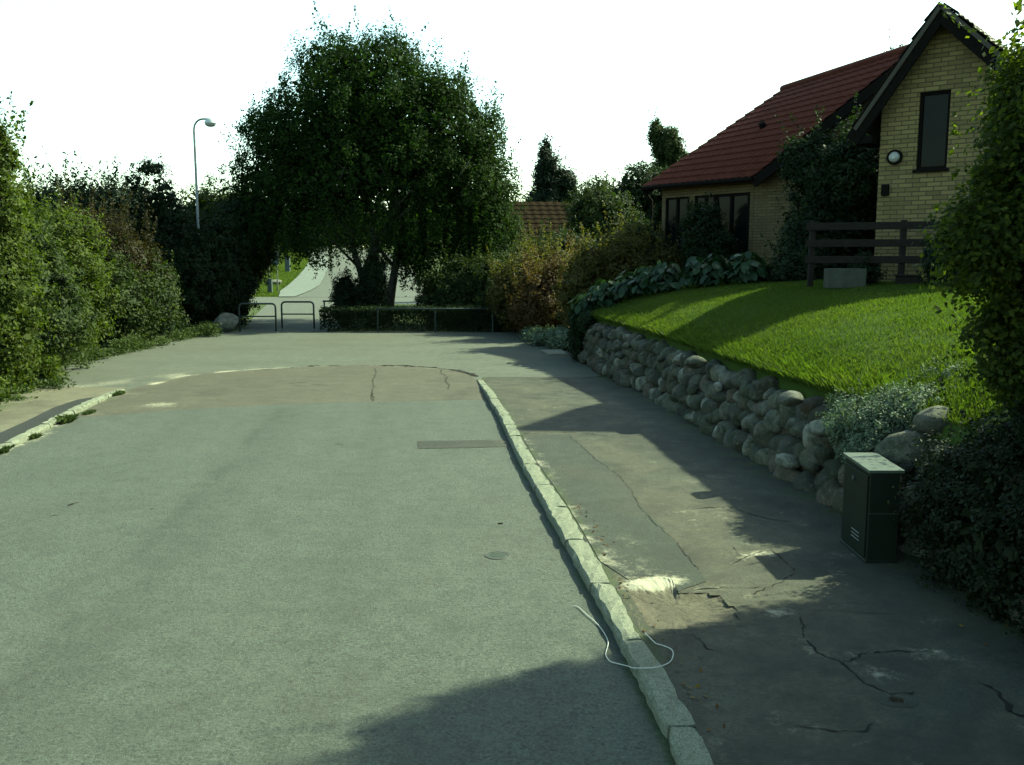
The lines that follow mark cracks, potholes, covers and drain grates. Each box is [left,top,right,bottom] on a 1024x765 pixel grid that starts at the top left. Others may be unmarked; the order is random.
crack [794,609,937,695]
pothole [615,576,762,637]
crack [262,365,478,401]
manhole cover [484,551,510,560]
crack [979,682,1024,717]
crack [688,545,795,595]
crack [784,723,872,732]
